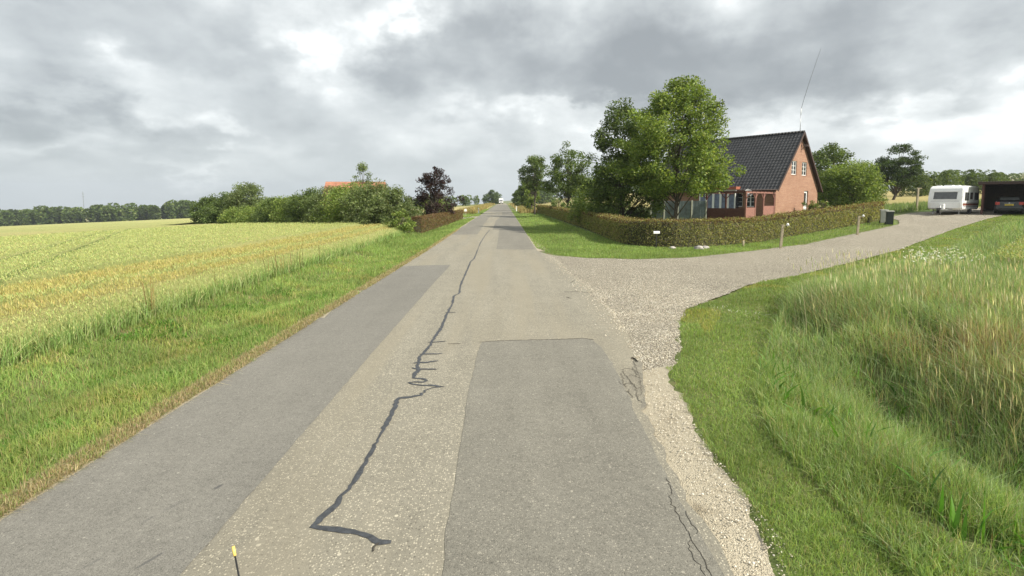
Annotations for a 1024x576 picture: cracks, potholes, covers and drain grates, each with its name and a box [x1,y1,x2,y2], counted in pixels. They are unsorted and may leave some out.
crack [666,478,712,576]
crack [622,361,643,401]
